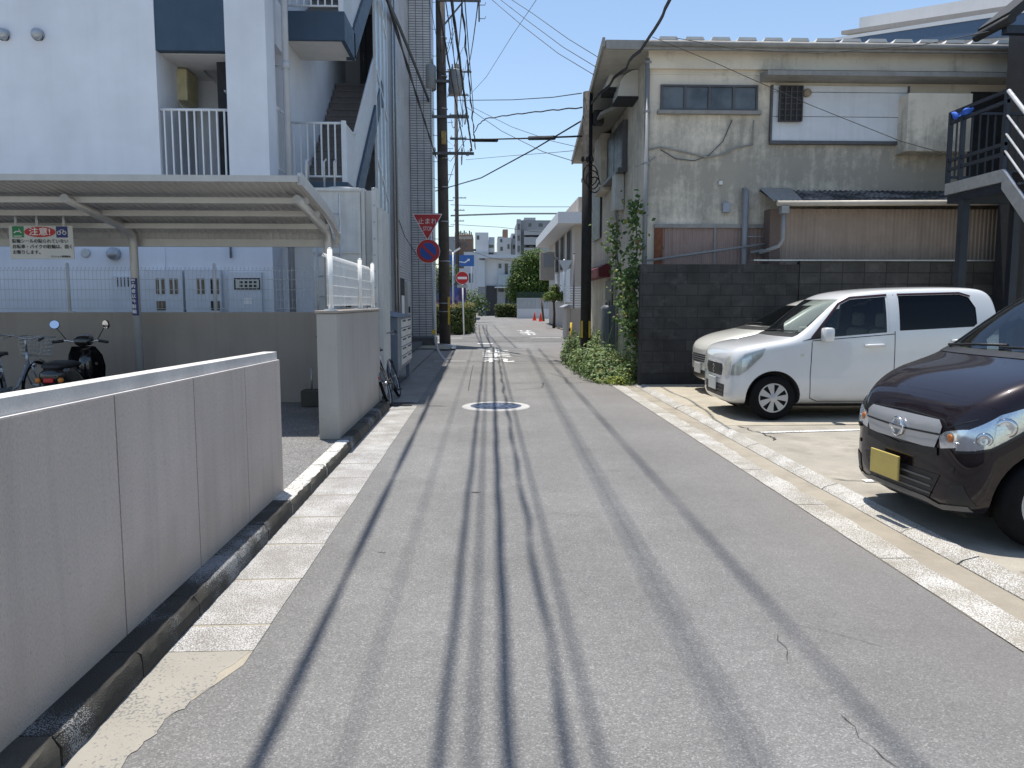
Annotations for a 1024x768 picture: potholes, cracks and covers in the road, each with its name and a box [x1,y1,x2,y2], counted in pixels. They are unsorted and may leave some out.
manhole cover [462,402,530,411]
